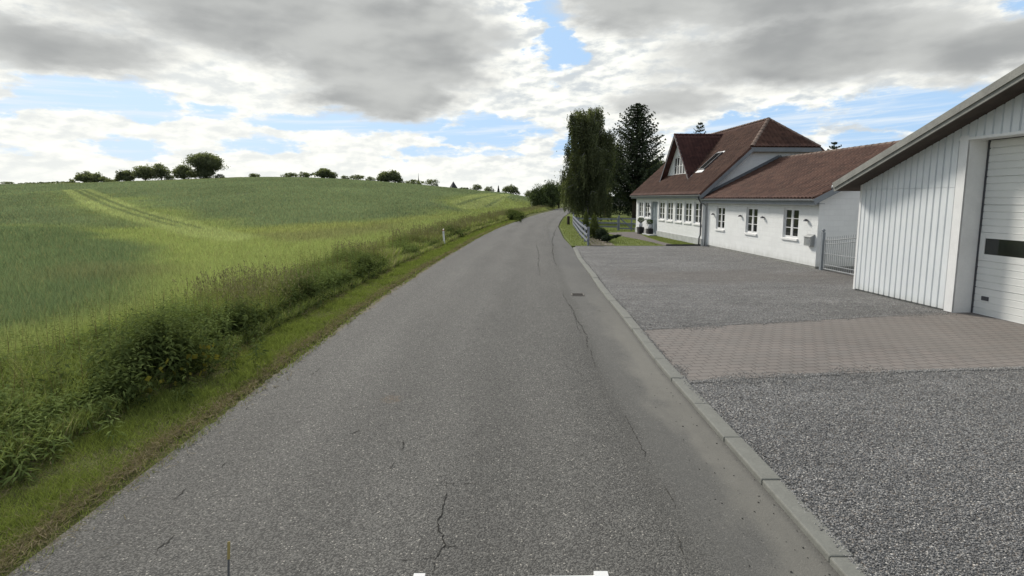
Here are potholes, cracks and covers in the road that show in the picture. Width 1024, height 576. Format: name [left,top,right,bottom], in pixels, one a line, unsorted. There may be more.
crack [400,483,477,574]
